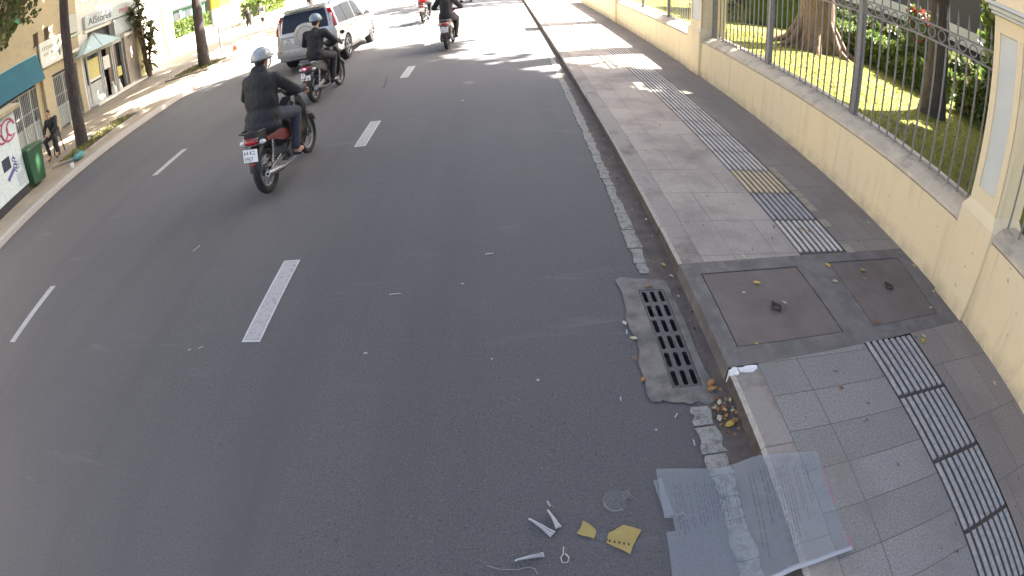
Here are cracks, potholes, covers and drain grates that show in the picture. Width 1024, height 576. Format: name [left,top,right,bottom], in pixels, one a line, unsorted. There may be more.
drain grate [639,289,701,388]
manhole cover [829,258,936,326]
manhole cover [702,267,842,347]
